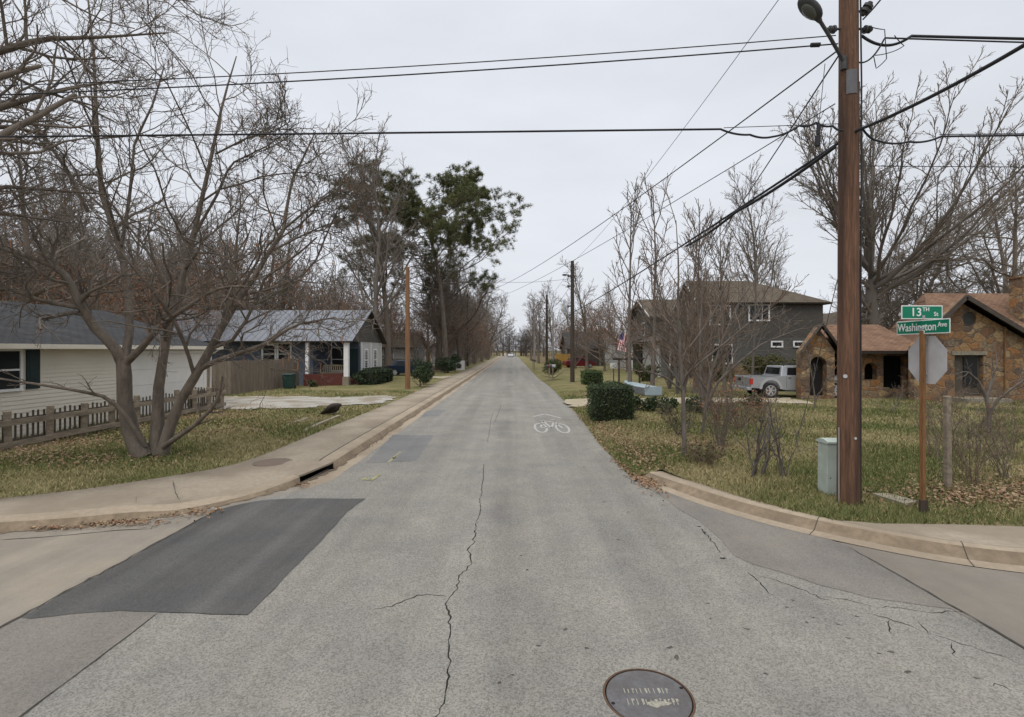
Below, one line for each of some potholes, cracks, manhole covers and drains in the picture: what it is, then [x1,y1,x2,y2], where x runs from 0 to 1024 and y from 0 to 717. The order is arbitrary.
crack [749,573,1015,662]
manhole cover [603,668,696,717]
crack [374,467,484,717]
drain grate [294,460,333,482]
manhole cover [252,458,293,466]
